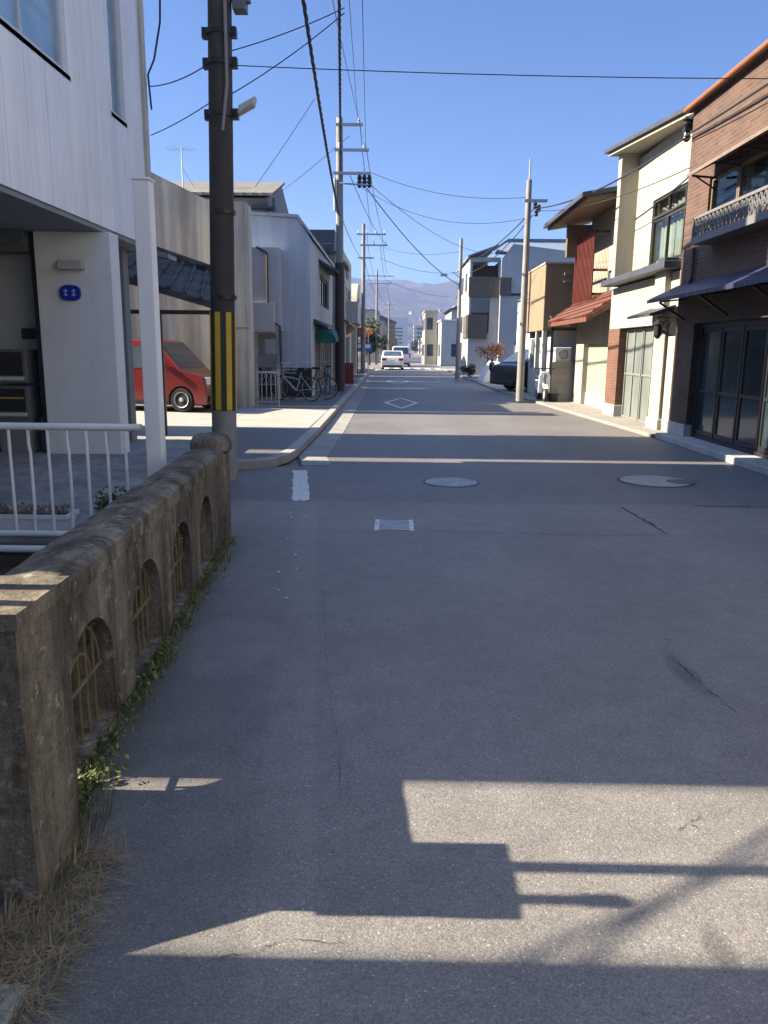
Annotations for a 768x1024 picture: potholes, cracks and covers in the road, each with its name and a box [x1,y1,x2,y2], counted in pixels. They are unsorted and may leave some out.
manhole cover [617,475,696,488]
crack [423,506,666,536]
crack [209,938,349,961]
manhole cover [423,477,480,487]
